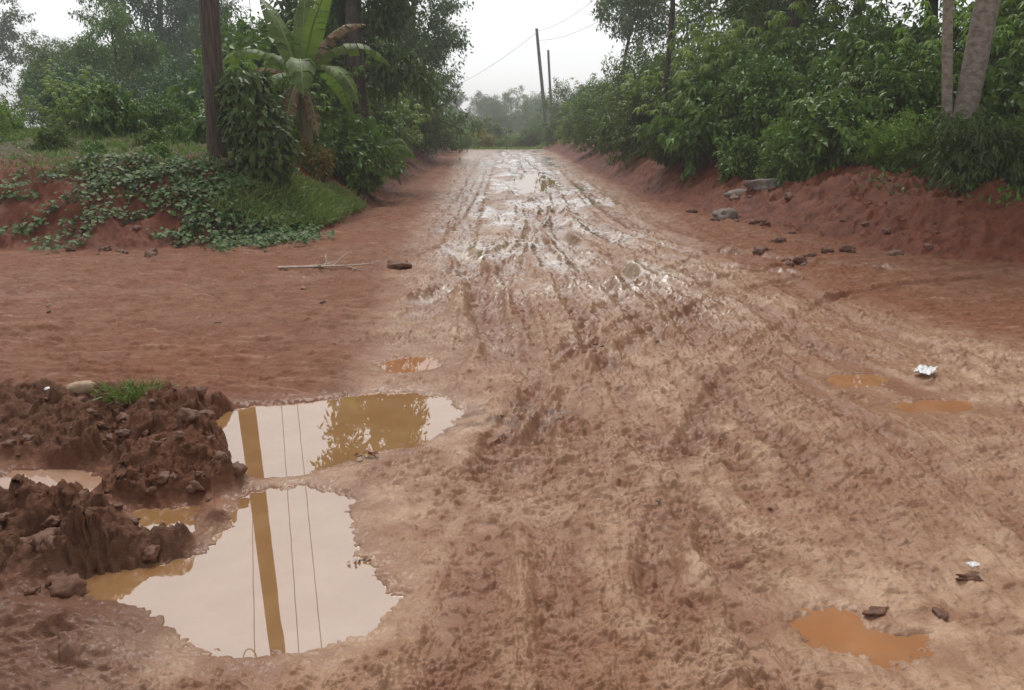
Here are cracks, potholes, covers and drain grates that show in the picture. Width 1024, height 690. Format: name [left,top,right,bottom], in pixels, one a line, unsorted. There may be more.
pothole [63,478,418,664]
pothole [875,394,987,415]
pothole [815,369,897,390]
pothole [778,593,945,673]
pothole [367,350,451,373]
pothole [198,386,475,480]
